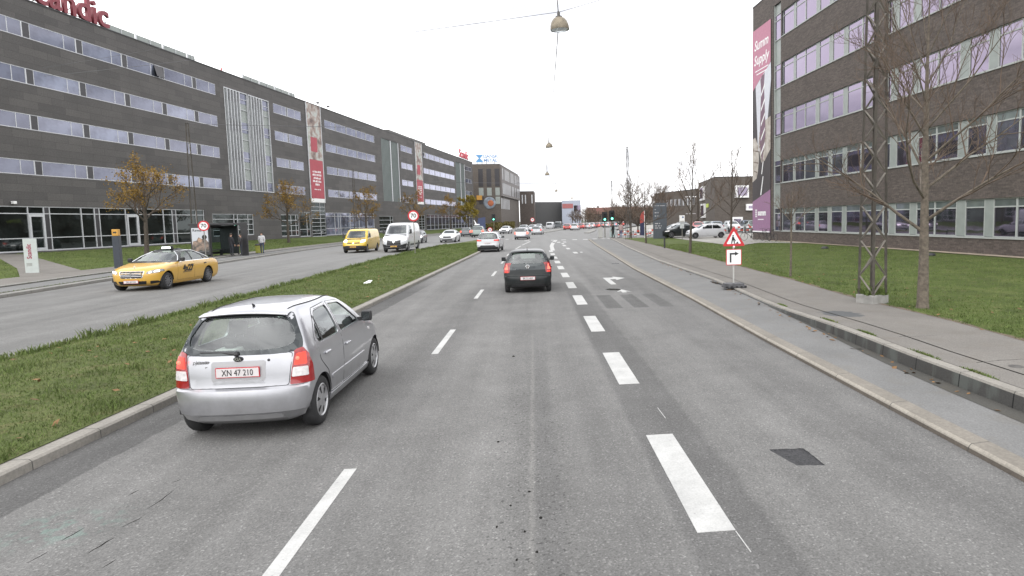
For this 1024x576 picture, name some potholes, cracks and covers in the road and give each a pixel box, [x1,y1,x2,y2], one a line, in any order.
crack [33,480,178,567]
